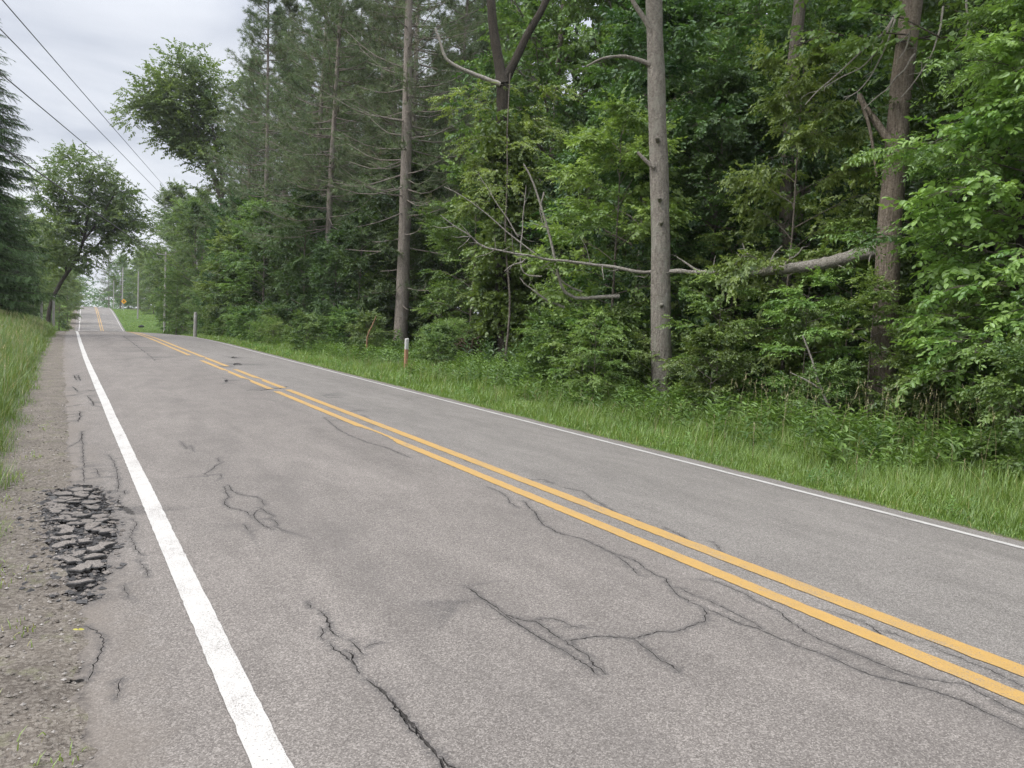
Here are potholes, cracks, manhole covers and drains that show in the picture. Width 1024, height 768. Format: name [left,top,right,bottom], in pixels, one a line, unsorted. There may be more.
pothole [3,484,131,620]
crack [494,489,1024,727]
crack [307,604,456,768]
crack [70,375,148,594]
crack [85,626,105,680]
